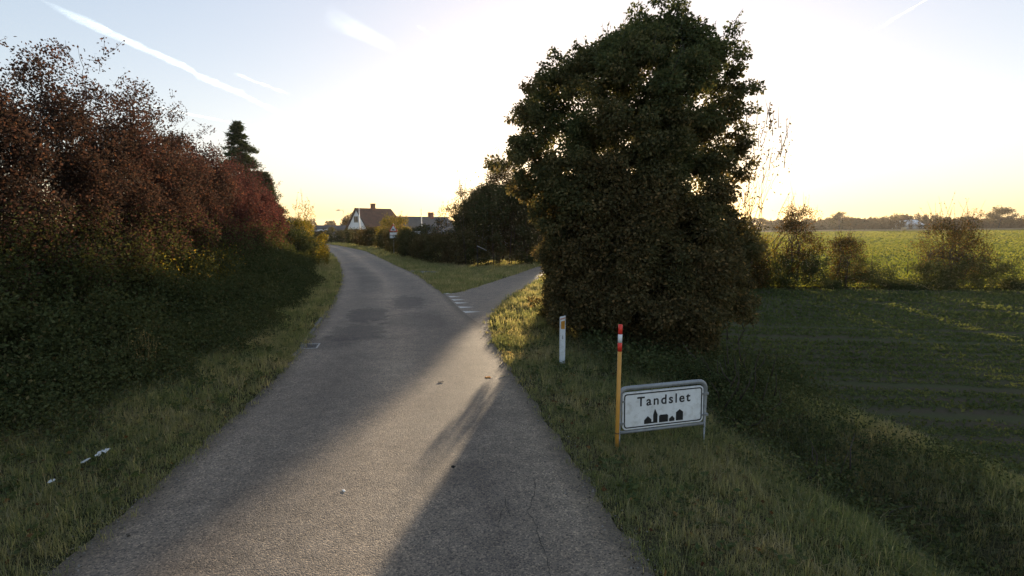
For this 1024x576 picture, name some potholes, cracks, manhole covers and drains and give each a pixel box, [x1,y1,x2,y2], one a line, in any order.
crack [498,478,551,576]
